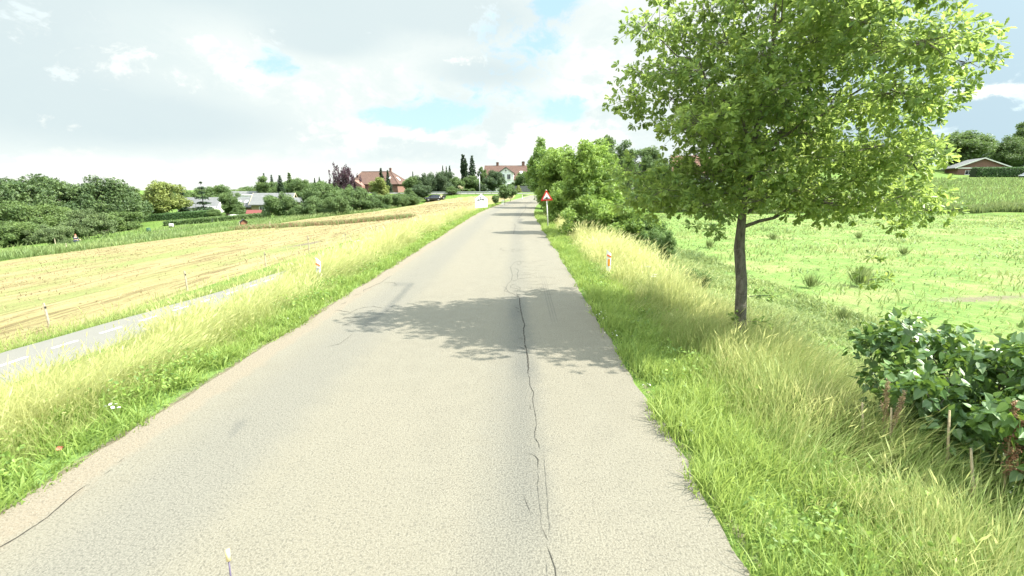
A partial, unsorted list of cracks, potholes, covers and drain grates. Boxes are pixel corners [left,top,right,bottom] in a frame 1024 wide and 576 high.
crack [0,459,123,547]
crack [501,206,556,576]
